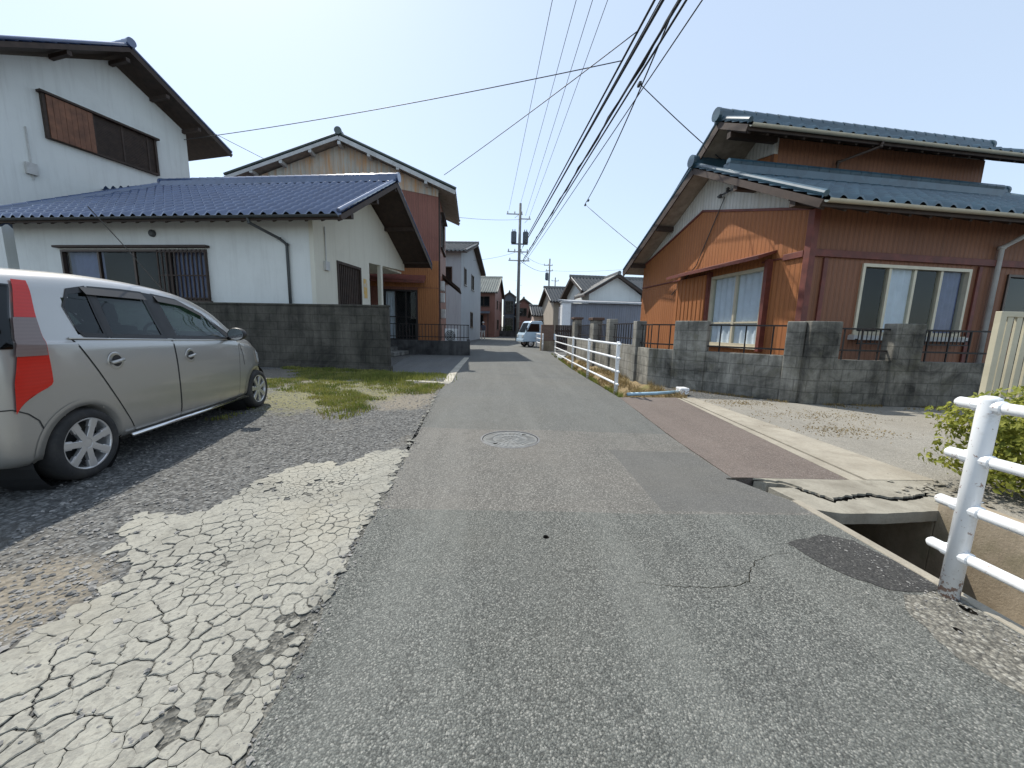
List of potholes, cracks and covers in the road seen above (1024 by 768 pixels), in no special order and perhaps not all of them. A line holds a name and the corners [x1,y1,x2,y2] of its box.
crack [633,553,783,588]
crack [726,477,942,503]
manhole cover [481,431,540,448]
crack [0,452,408,768]
